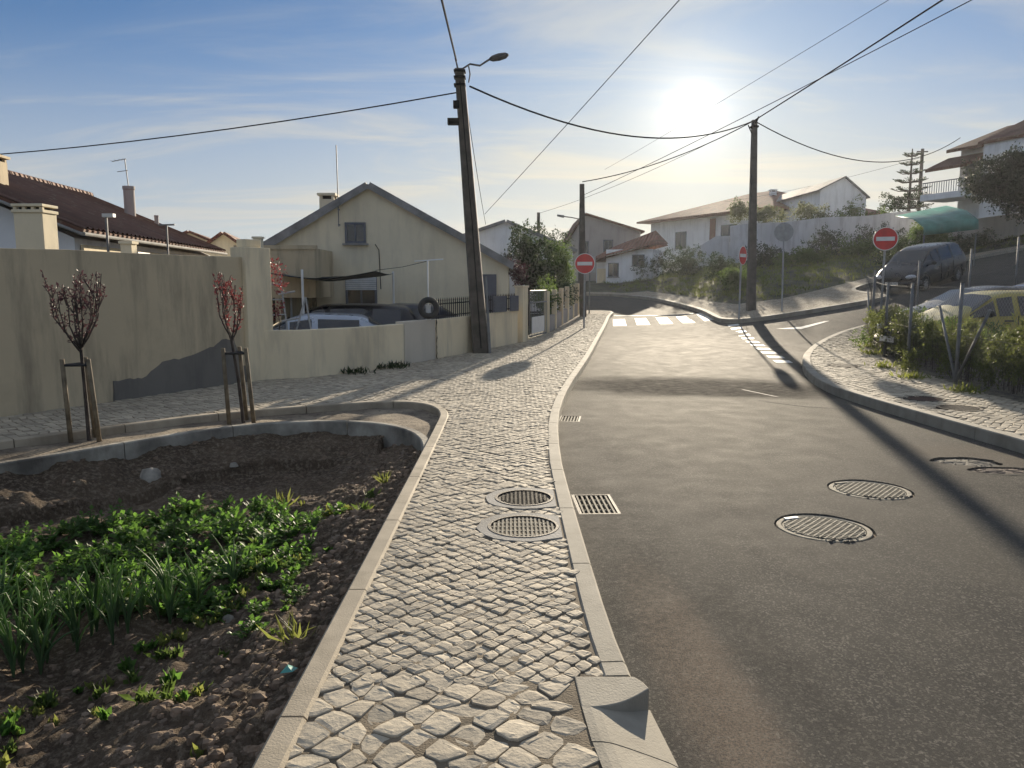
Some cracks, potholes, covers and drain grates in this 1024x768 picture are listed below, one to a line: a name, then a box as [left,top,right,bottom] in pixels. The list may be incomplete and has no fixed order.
drain grate [571,494,621,514]
manhole cover [828,481,914,500]
pothole [933,458,999,467]
manhole cover [775,515,876,543]
